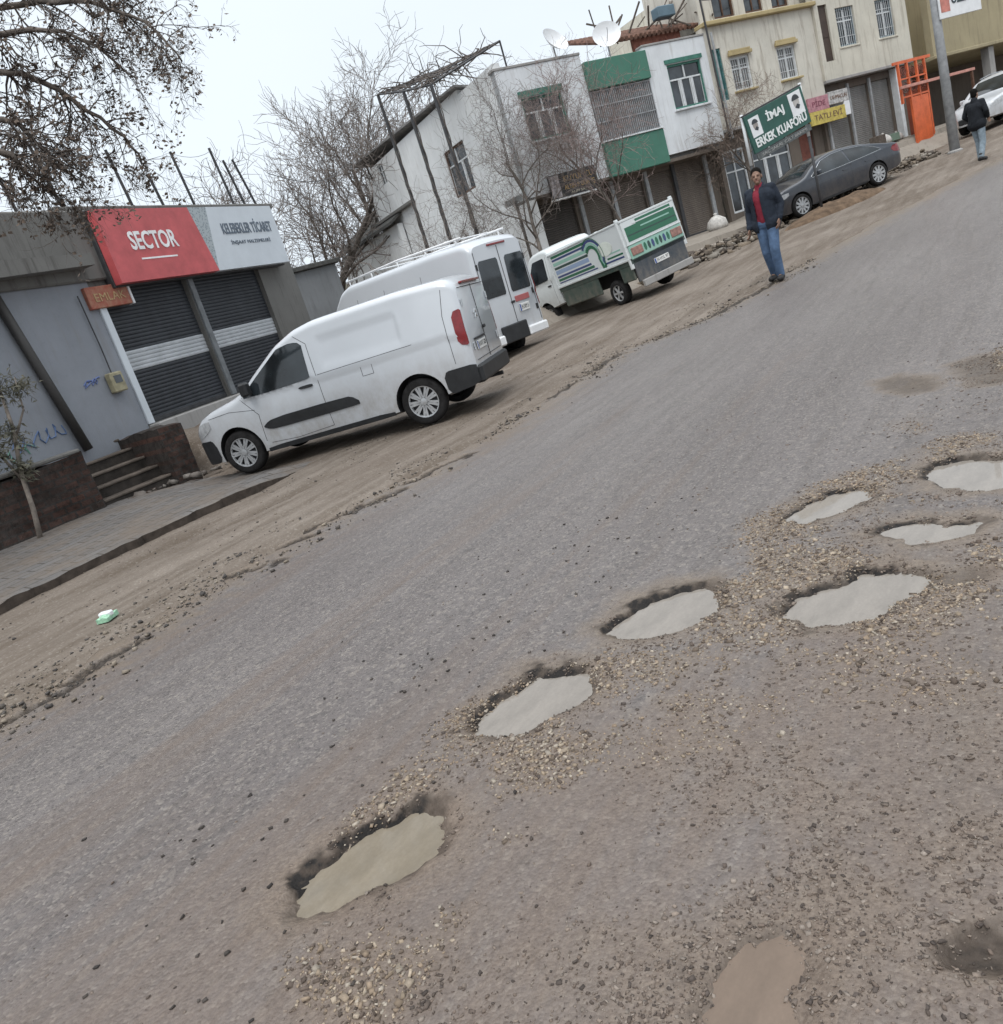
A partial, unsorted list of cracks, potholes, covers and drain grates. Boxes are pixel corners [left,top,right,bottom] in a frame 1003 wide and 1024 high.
pothole [867,511,1003,551]
pothole [257,790,474,941]
pothole [672,918,854,1024]
pothole [590,576,745,649]
pothole [452,658,619,750]
pothole [912,451,1003,496]
pothole [765,556,949,637]
pothole [773,481,892,529]
pothole [910,901,1003,990]
